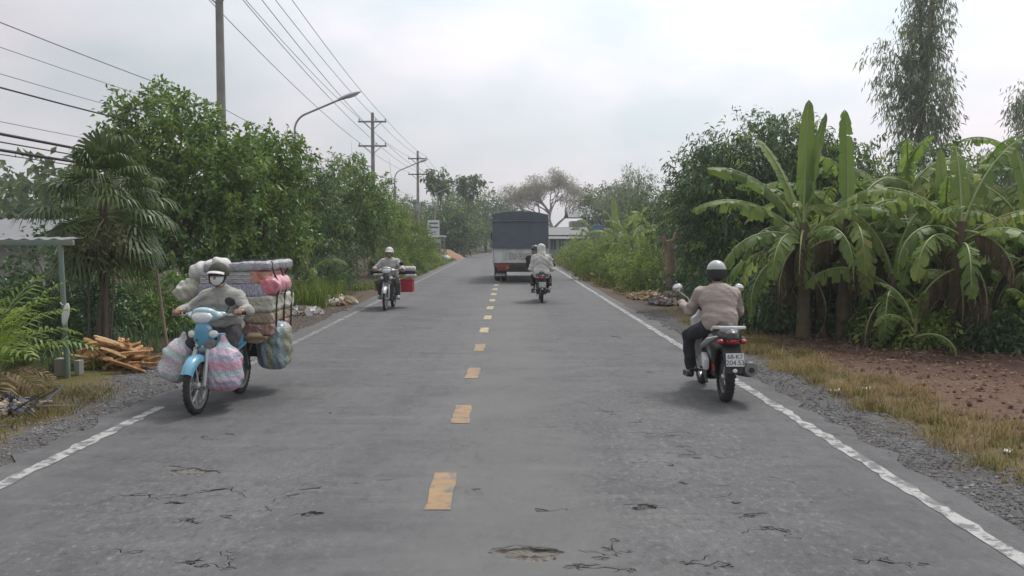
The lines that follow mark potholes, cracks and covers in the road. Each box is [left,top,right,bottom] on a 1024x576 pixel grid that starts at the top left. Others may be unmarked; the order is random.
pothole [163,466,221,476]
crack [598,370,802,539]
crack [264,486,323,512]
pothole [488,545,565,562]
crack [119,486,247,524]
